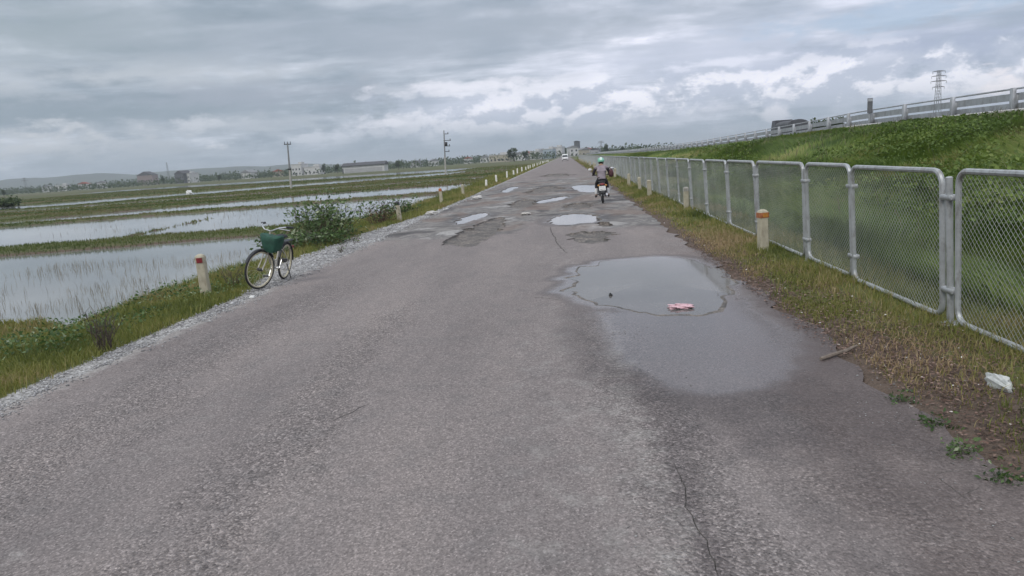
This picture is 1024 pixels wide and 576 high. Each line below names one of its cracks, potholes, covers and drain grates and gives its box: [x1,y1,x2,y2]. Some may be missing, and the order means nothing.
pothole [440,217,506,247]
pothole [453,212,489,225]
crack [674,464,718,576]
pothole [547,213,602,225]
pothole [534,196,568,204]
pothole [560,257,740,317]
pothole [566,231,619,244]
